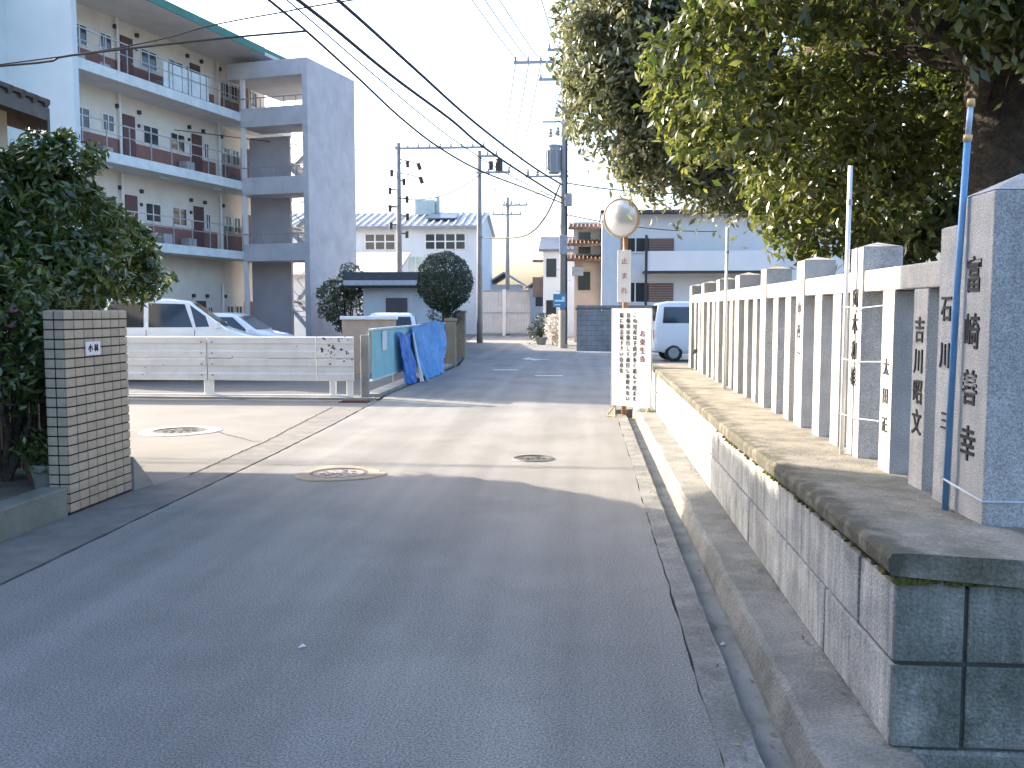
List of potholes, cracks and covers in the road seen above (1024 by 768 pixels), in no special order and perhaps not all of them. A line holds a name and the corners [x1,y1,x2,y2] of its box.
manhole cover [138,426,222,436]
manhole cover [294,465,387,481]
